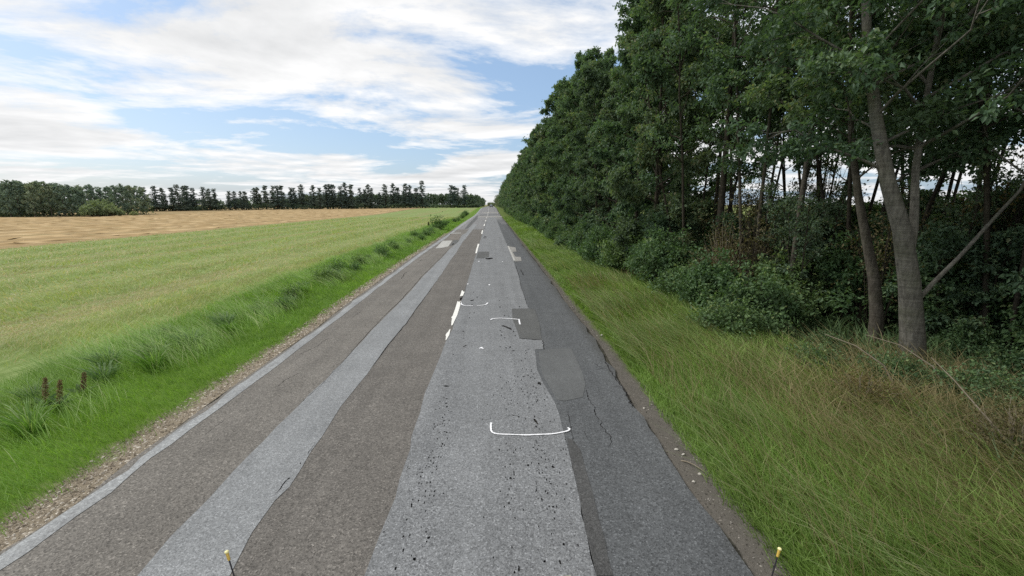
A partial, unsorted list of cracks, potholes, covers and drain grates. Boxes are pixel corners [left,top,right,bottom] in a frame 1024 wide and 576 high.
crack [596,362,633,406]
crack [568,390,629,445]
